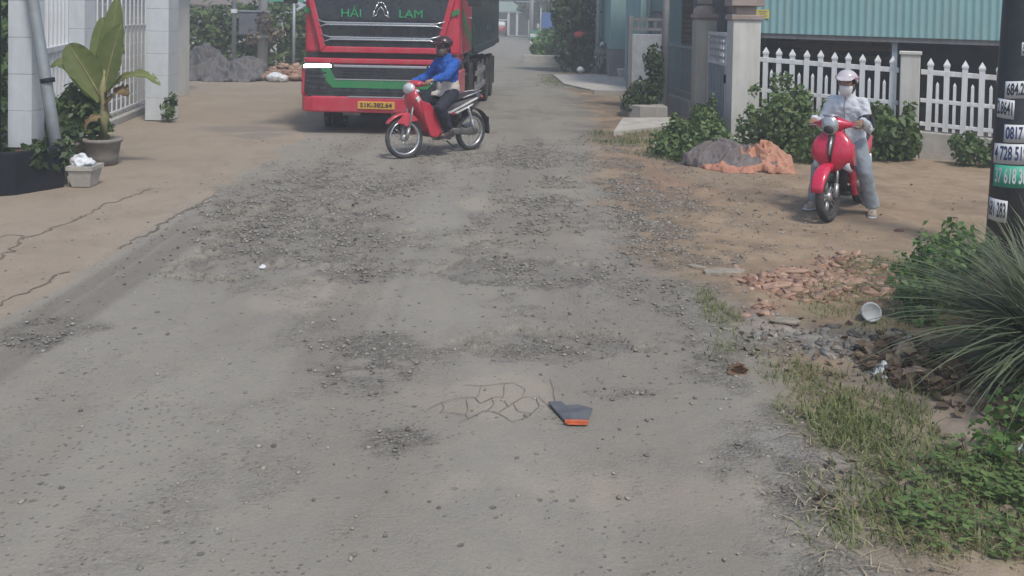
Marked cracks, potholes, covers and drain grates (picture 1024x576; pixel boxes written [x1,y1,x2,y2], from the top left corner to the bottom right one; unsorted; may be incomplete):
pothole [447,324,664,362]
crack [1,194,215,305]
pothole [428,255,637,291]
crack [428,378,556,422]
